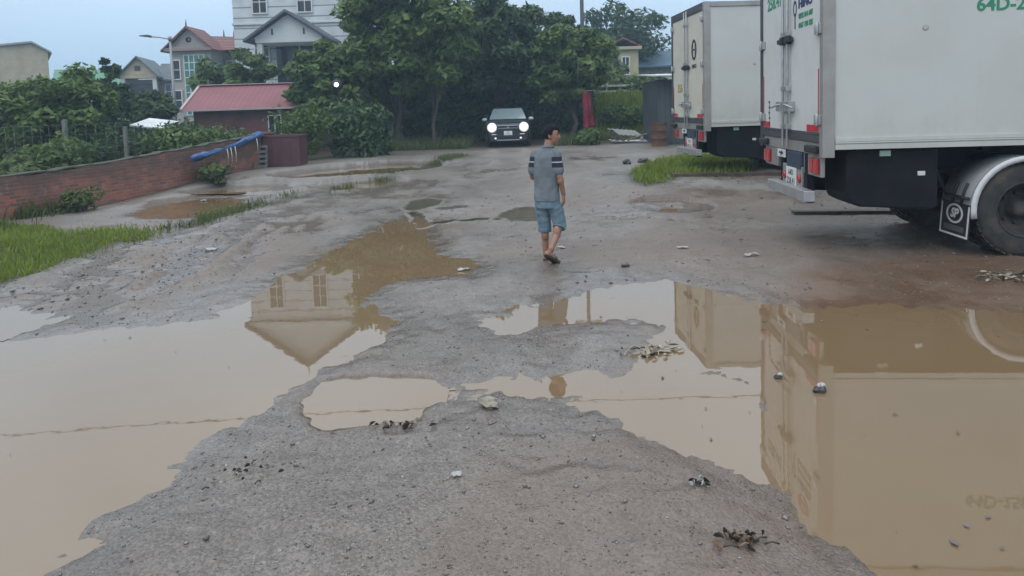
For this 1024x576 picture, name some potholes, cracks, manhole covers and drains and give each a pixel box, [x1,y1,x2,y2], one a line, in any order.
pothole [399,197,448,212]
pothole [272,366,460,441]
pothole [488,206,537,222]
